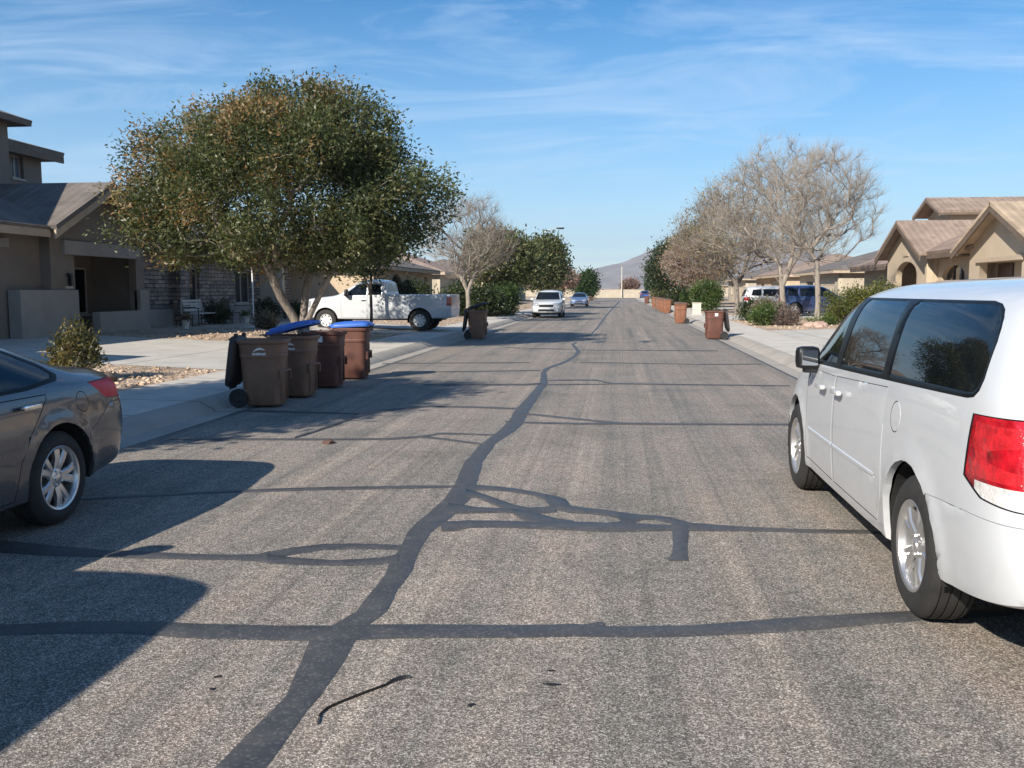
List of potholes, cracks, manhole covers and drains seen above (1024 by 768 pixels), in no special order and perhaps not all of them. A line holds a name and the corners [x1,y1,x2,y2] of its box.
crack [317,675,410,724]
